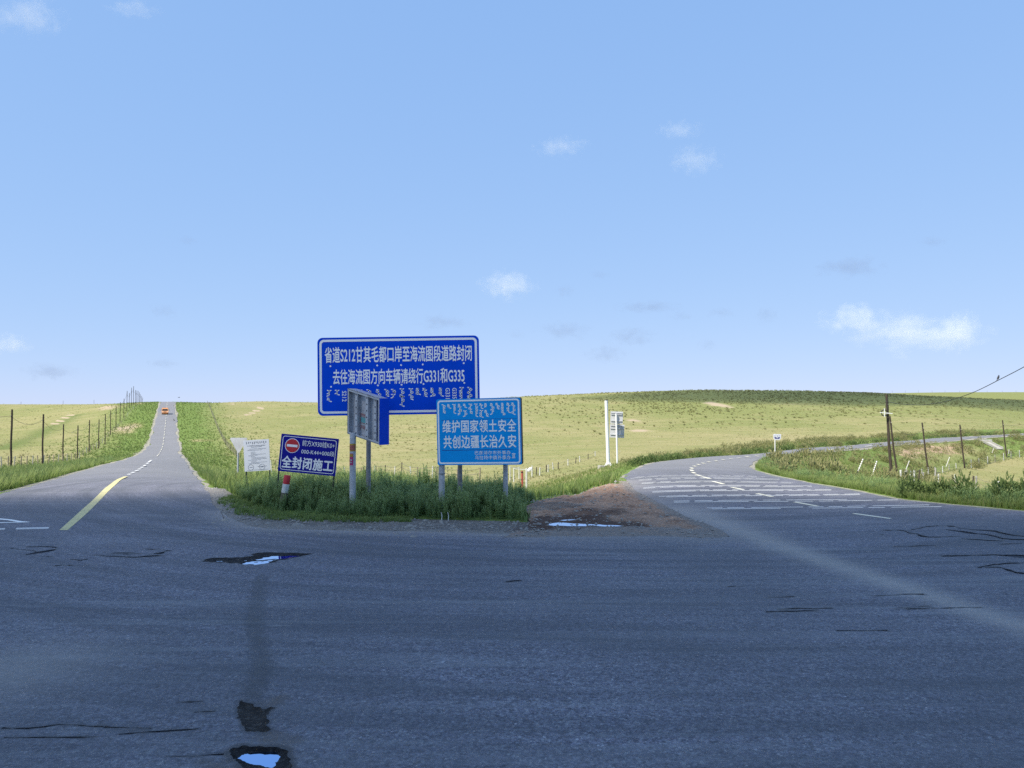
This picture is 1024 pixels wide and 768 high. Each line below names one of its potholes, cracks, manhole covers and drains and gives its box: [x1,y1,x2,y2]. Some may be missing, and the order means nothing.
pothole [202,552,309,565]
crack [882,526,1024,574]
crack [769,596,831,612]
crack [1,701,215,738]
pothole [229,746,292,768]
pothole [237,701,275,733]
crack [10,546,171,566]
